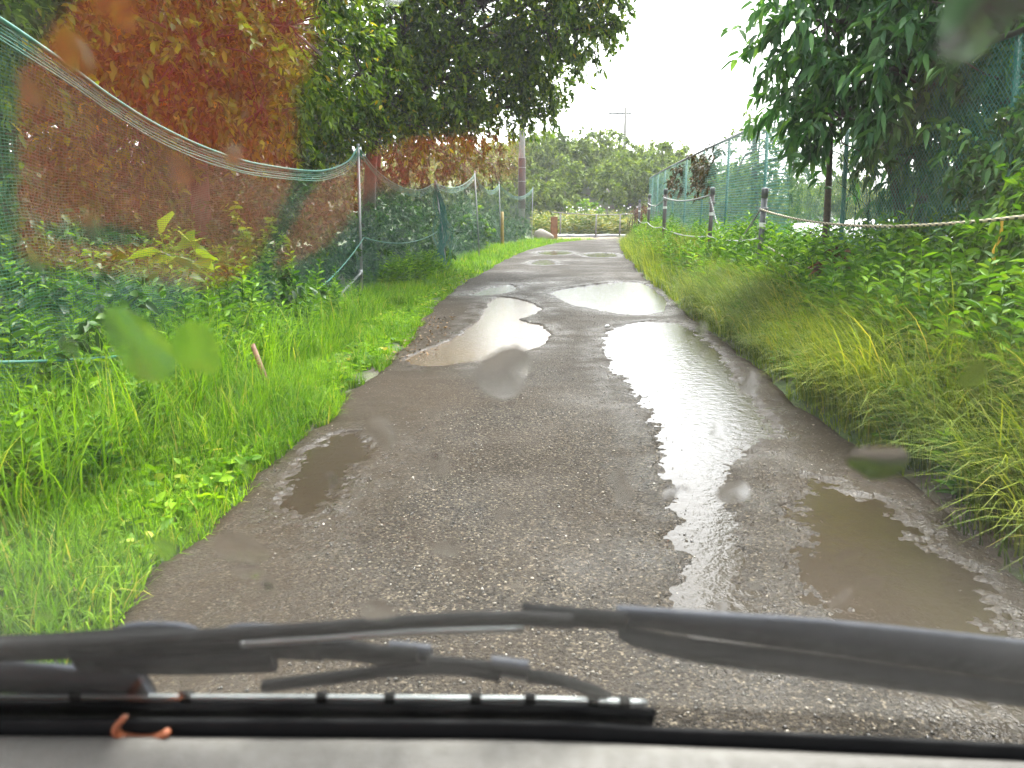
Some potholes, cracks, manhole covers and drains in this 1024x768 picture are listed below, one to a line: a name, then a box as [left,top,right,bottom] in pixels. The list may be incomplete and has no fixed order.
pothole [546,281,675,316]
pothole [764,469,1024,742]
pothole [593,320,799,692]
pothole [262,428,387,526]
pothole [393,295,558,368]
